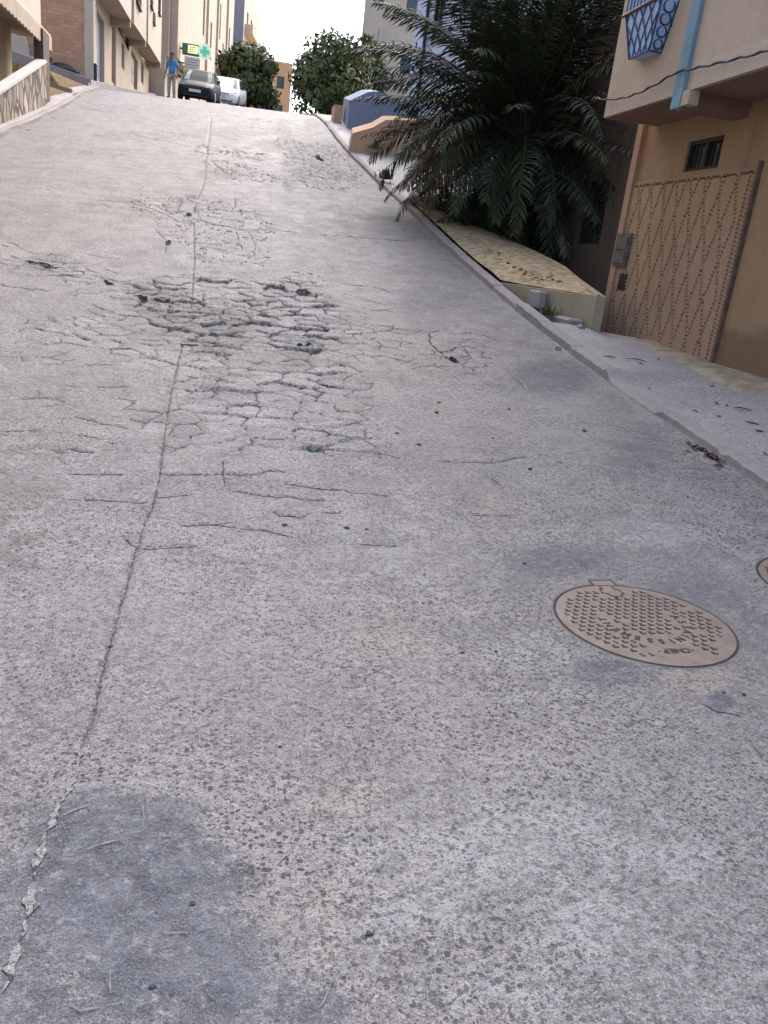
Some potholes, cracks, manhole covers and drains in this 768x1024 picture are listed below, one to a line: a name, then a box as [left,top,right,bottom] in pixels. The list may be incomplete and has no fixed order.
pothole [292,288,314,297]
manhole cover [754,557,768,586]
manhole cover [551,580,742,670]
pothole [150,296,173,305]
crack [4,117,653,550]
